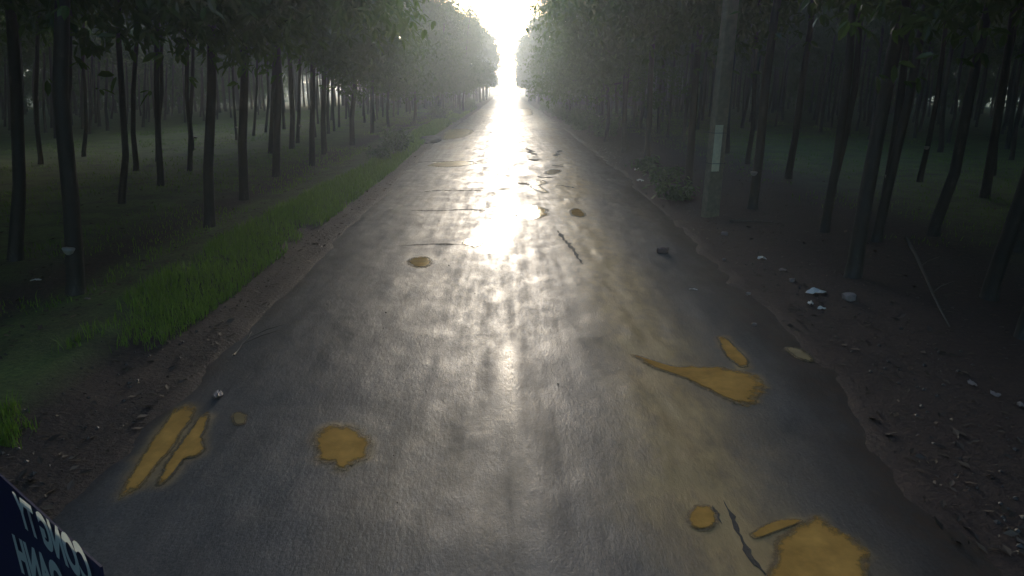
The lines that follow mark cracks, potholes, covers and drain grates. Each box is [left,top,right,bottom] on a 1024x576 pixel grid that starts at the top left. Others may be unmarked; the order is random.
crack [557,230,582,263]
crack [712,500,768,576]
